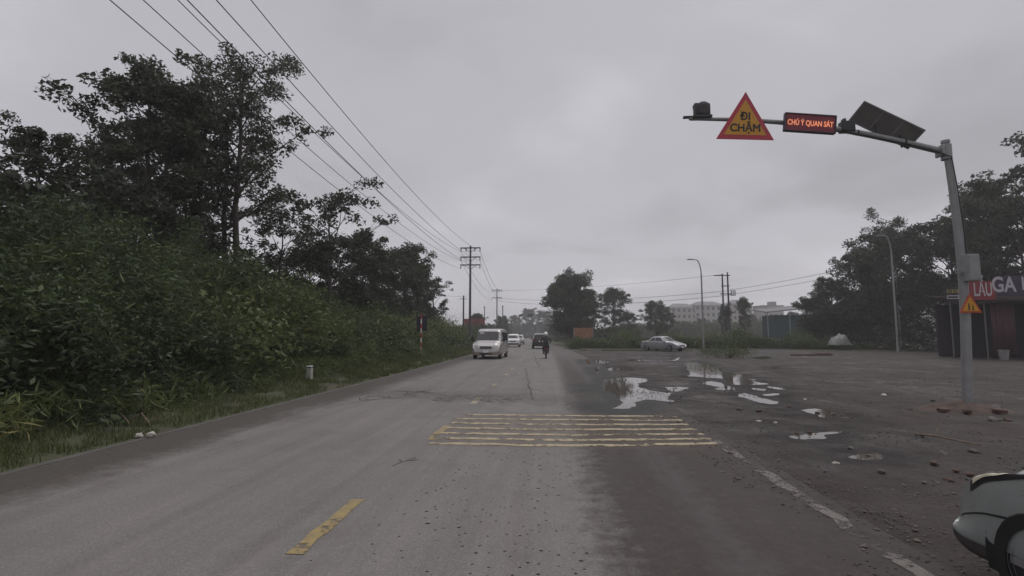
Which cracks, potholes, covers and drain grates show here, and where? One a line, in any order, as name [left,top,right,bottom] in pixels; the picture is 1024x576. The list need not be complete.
pothole [683,362,769,385]
pothole [848,452,883,460]
pothole [602,377,674,409]
pothole [801,408,851,419]
pothole [703,381,735,390]
pothole [737,392,779,404]
crack [353,355,544,403]
pothole [788,431,845,439]
